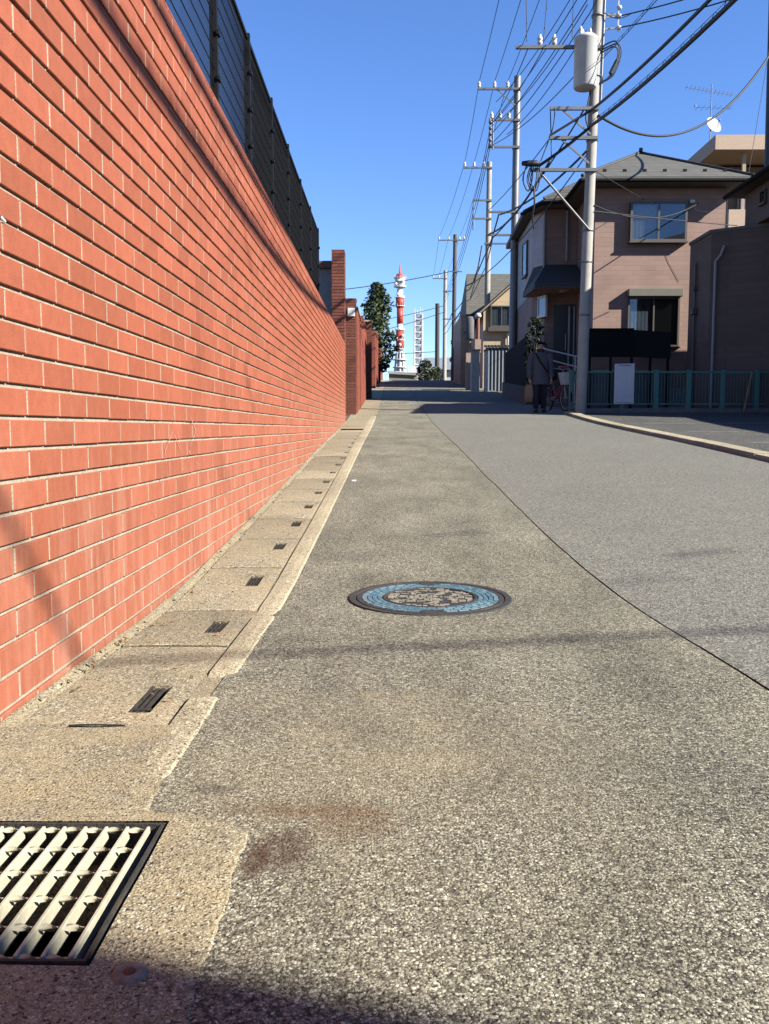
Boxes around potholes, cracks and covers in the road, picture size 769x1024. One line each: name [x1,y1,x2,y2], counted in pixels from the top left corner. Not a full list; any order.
manhole cover [349,581,512,616]
drain grate [0,822,165,966]
